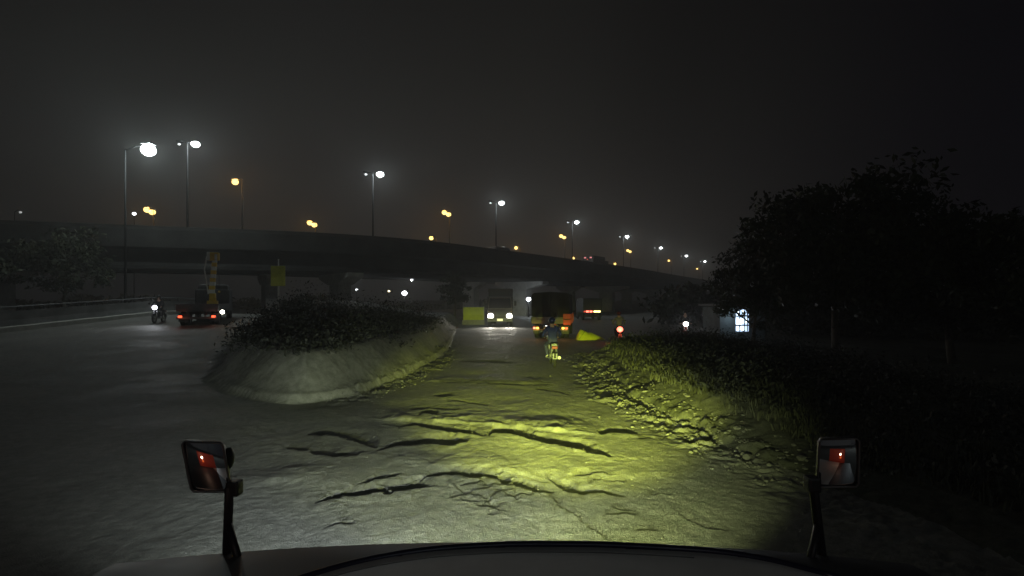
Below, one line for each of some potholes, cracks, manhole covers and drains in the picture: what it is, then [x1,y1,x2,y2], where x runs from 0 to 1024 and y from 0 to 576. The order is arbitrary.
crack [446,466,731,542]
